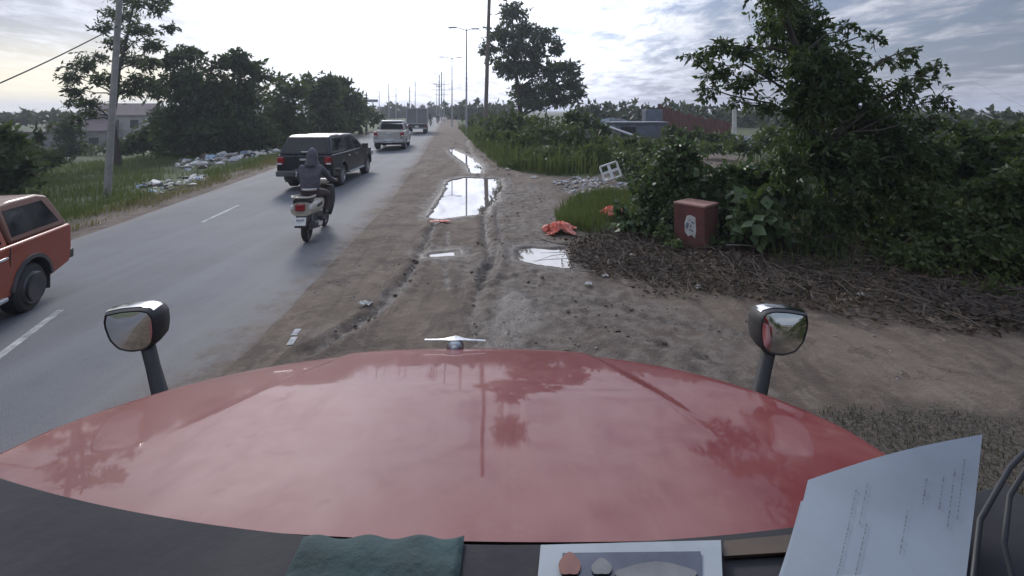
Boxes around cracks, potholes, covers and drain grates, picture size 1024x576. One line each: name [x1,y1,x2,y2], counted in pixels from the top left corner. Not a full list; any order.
pothole [423,249,461,258]
pothole [425,177,504,219]
pothole [447,149,484,174]
pothole [512,245,576,268]
